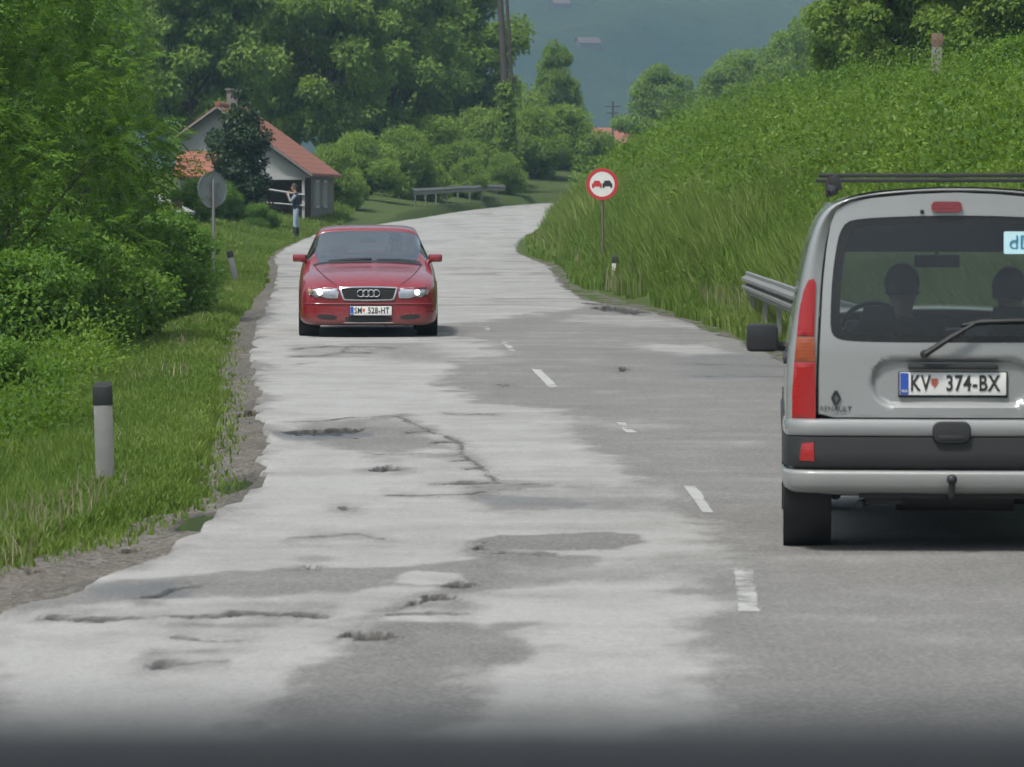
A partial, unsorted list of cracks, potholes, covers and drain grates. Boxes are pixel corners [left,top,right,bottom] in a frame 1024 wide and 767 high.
pothole [330,628,405,644]
crack [297,413,543,498]
pothole [365,463,409,473]
pothole [429,577,484,589]
pothole [276,424,373,439]
crack [289,531,388,542]
pothole [383,593,466,612]
